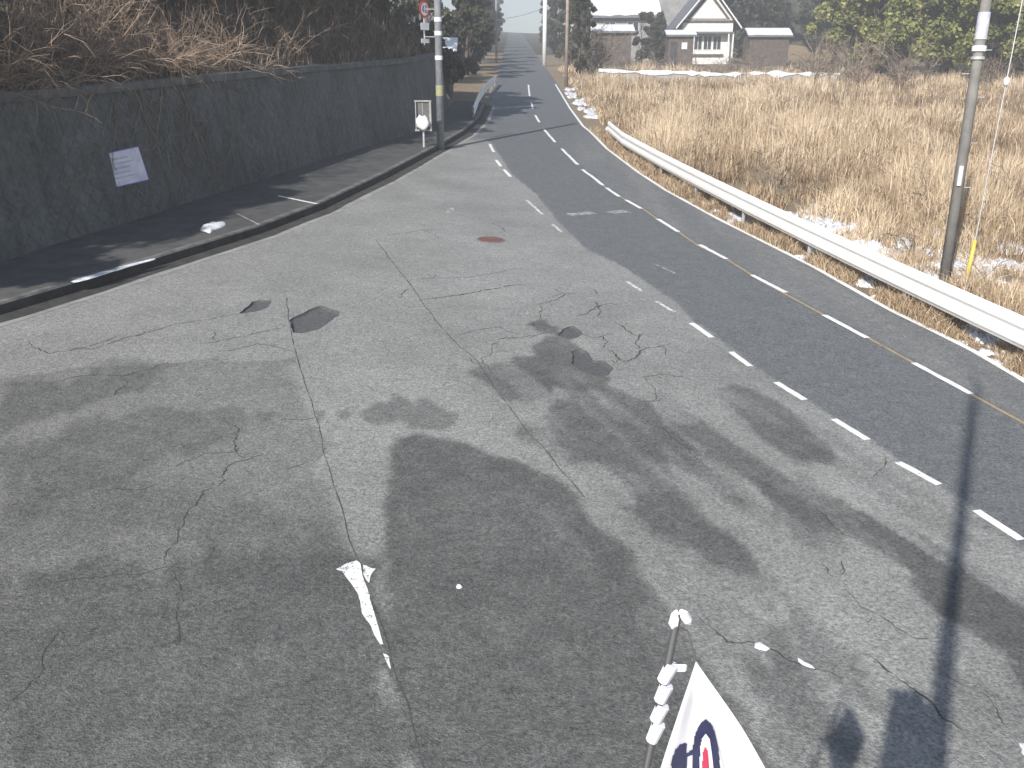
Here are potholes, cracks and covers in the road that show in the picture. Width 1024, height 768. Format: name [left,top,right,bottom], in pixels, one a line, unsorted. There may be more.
crack [698,616,843,678]
crack [163,421,260,641]
pothole [557,326,582,339]
pothole [240,300,271,314]
pothole [290,305,341,333]
crack [210,328,289,351]
crack [401,269,521,299]
crack [450,289,682,403]
crack [872,657,1011,734]
